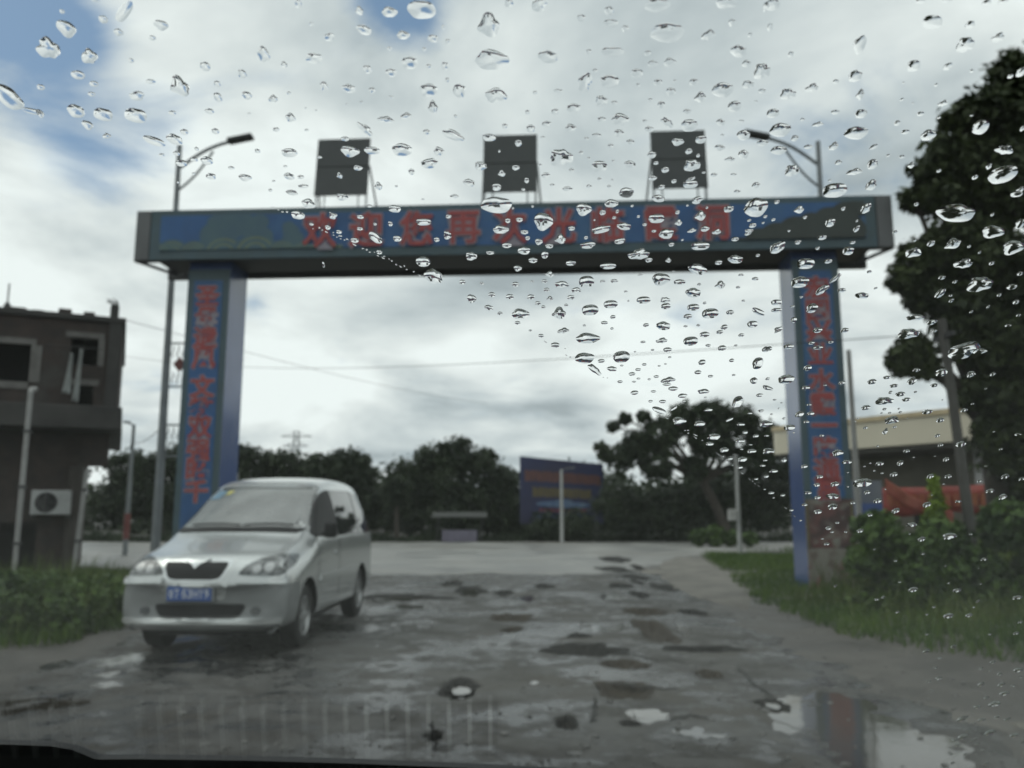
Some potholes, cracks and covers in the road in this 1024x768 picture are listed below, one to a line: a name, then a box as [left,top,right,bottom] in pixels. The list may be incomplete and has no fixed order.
pothole [555,714,578,730]
pothole [454,586,489,597]
pothole [488,613,534,622]
pothole [438,677,479,701]
pothole [600,658,652,670]
pothole [539,642,630,657]
pothole [424,729,442,742]
pothole [631,619,683,644]
pothole [594,681,658,700]
